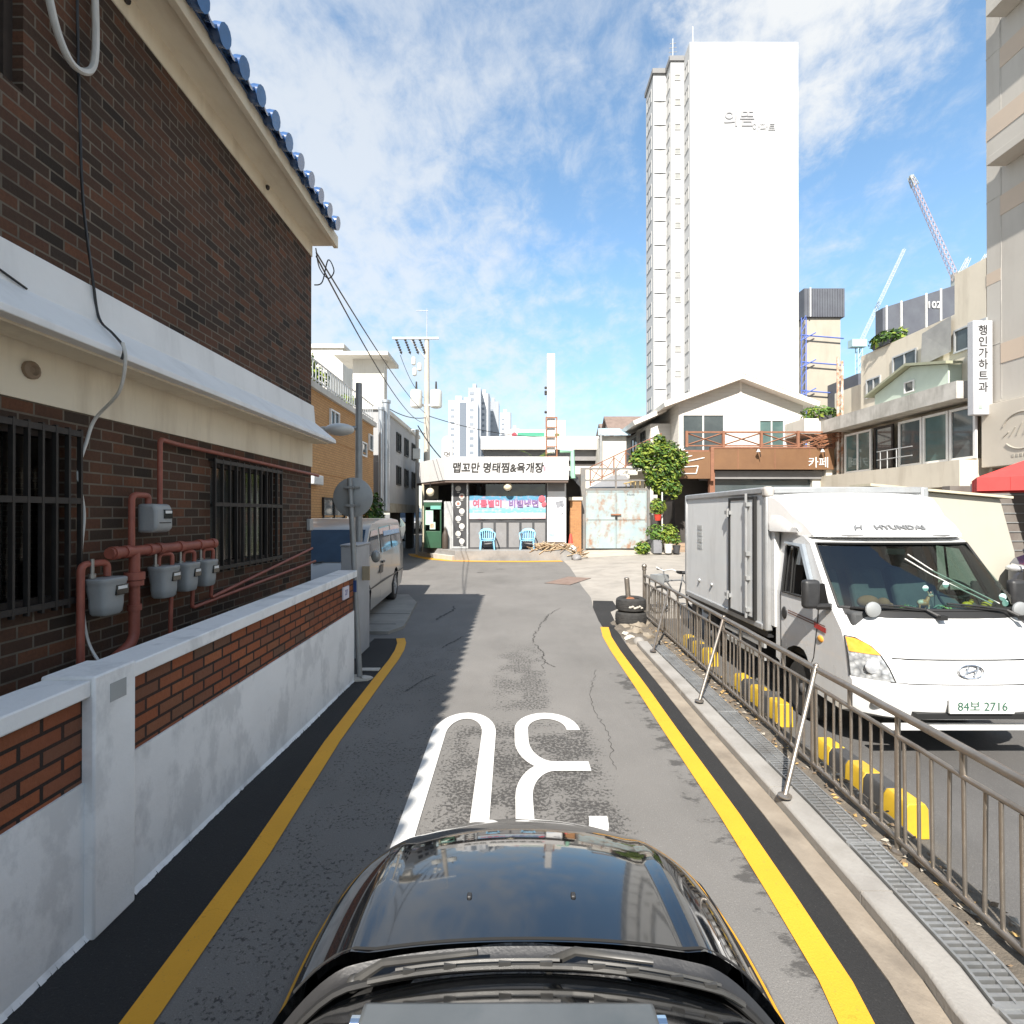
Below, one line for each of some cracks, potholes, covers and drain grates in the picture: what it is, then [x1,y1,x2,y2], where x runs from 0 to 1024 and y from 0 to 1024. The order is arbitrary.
crack [532,608,560,669]
manhole cover [546,577,591,585]
crack [590,670,617,770]
